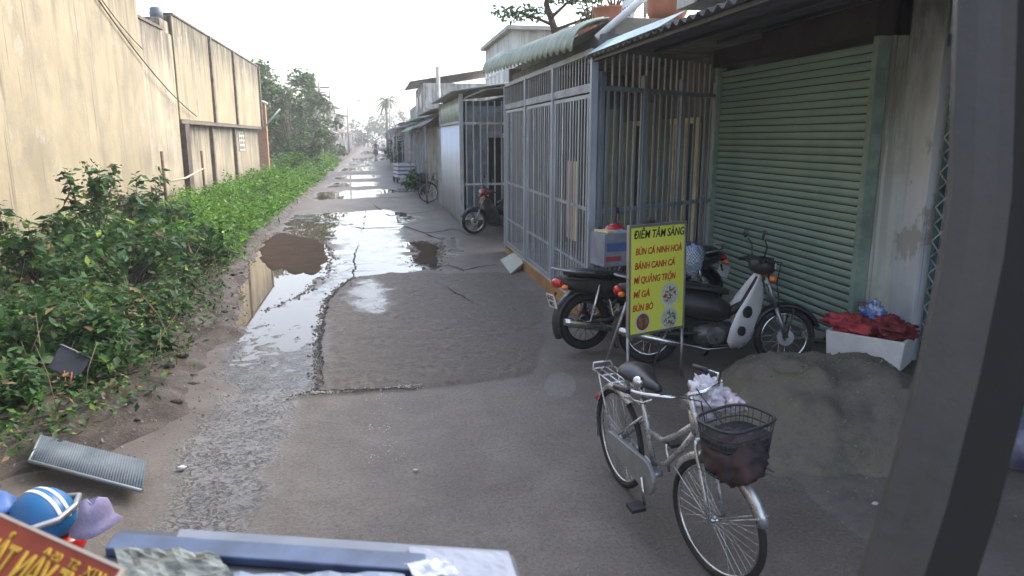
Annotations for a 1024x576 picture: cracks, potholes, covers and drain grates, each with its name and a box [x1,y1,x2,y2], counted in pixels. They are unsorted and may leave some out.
crack [298,195,482,395]
pothole [233,232,336,312]
